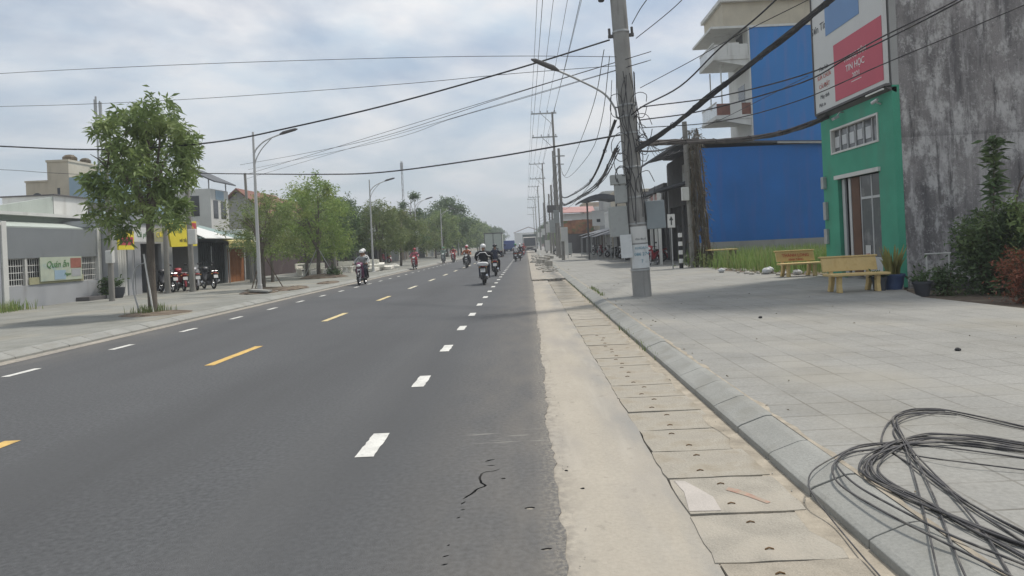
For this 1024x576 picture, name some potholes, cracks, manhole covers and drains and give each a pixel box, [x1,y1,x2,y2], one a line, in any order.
crack [442,459,499,565]
